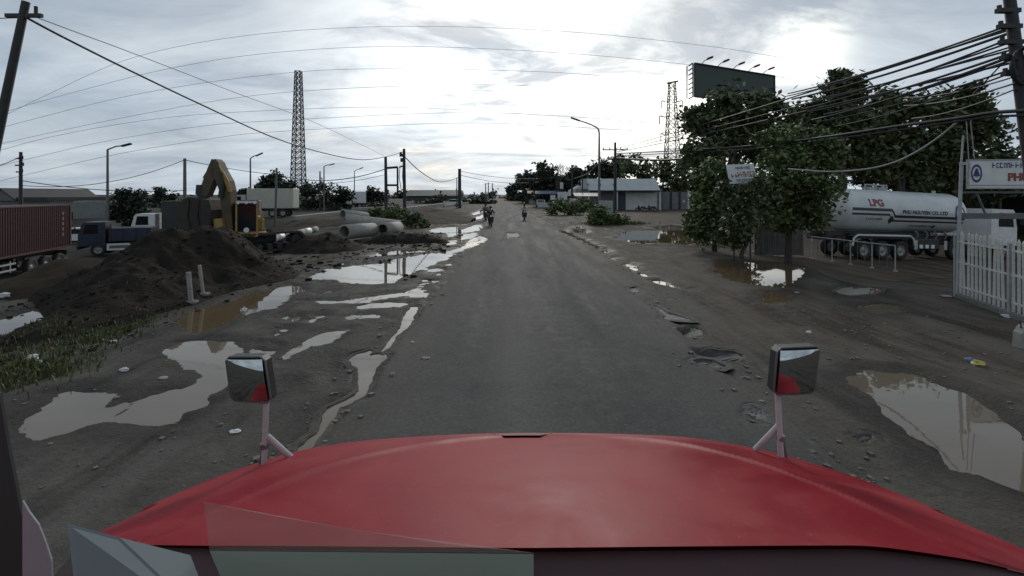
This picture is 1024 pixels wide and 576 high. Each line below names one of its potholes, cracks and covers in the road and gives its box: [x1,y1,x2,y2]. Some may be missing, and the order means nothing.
pothole [650,304,699,323]
pothole [741,403,776,425]
pothole [844,428,886,448]
pothole [287,348,394,453]
pothole [695,347,756,365]
pothole [681,327,709,338]
pothole [831,286,886,296]
pothole [377,305,423,355]
pothole [687,356,735,372]
